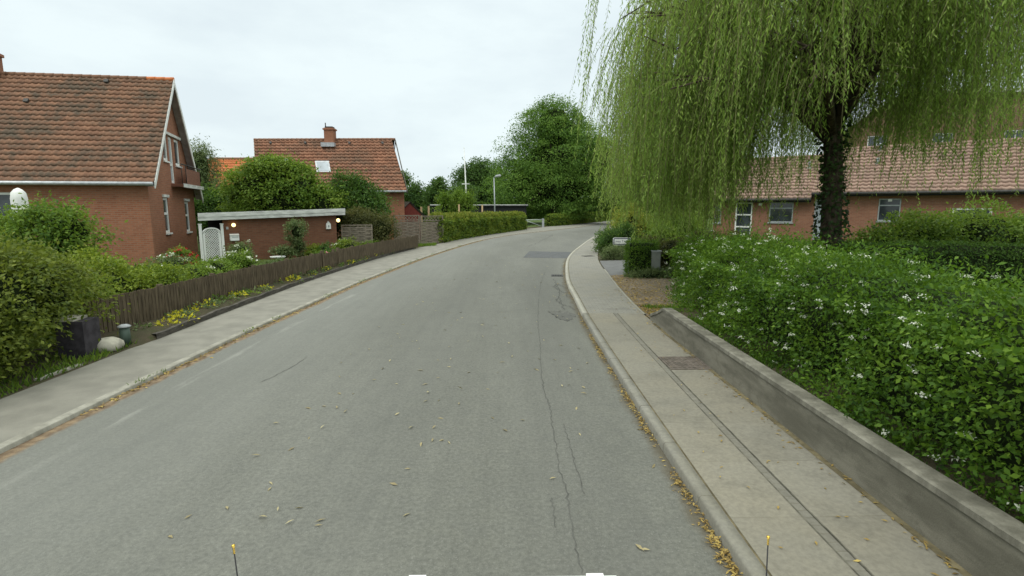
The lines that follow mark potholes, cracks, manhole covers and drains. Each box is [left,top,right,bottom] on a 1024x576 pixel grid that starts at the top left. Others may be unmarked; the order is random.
manhole cover [658,356,711,370]
crack [537,278,585,572]
